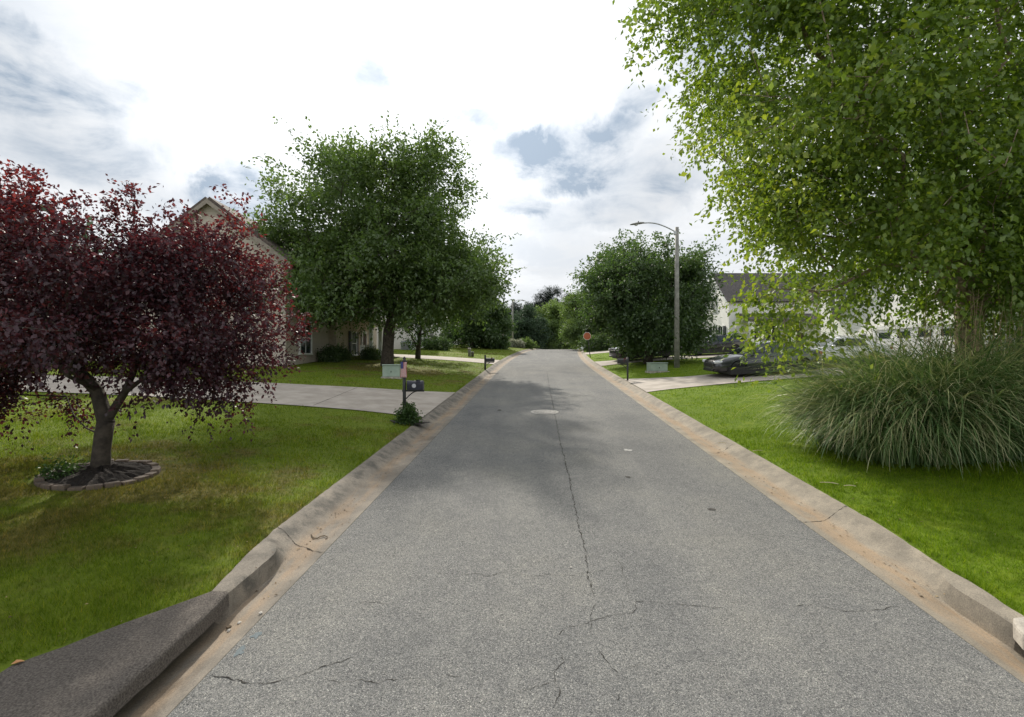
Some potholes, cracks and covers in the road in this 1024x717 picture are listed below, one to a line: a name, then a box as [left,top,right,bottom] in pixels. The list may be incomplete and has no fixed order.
crack [431,561,730,700]
crack [208,657,421,684]
